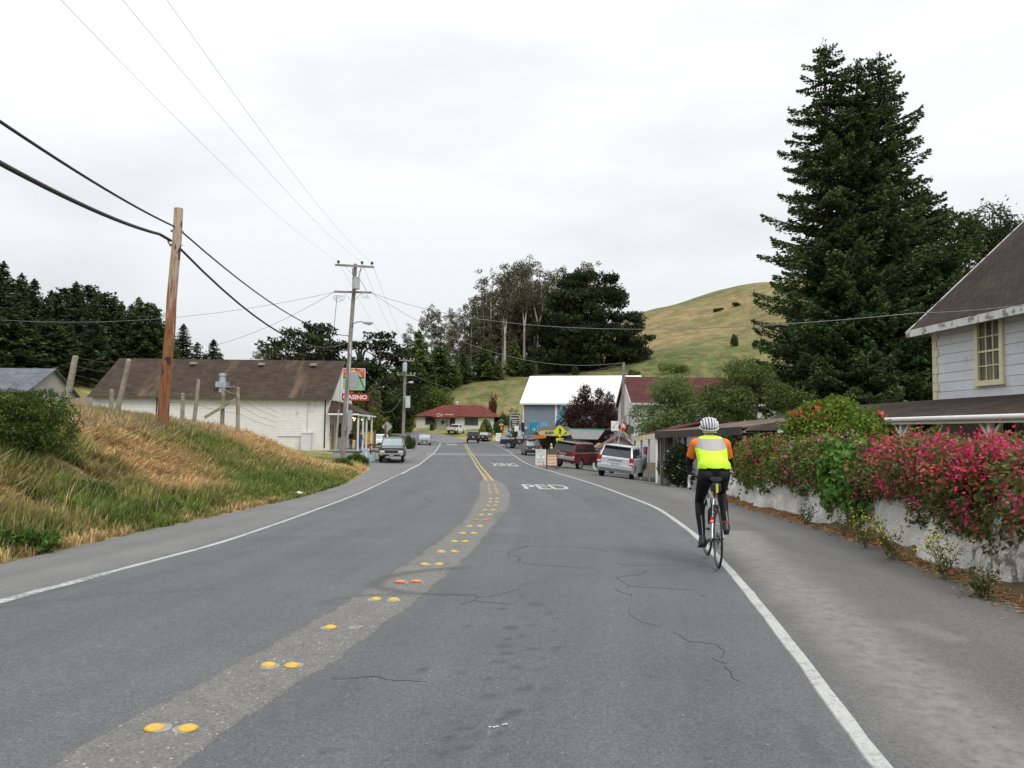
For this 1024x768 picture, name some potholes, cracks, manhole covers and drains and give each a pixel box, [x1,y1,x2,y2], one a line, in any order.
crack [437,588,519,610]
crack [495,535,738,681]
